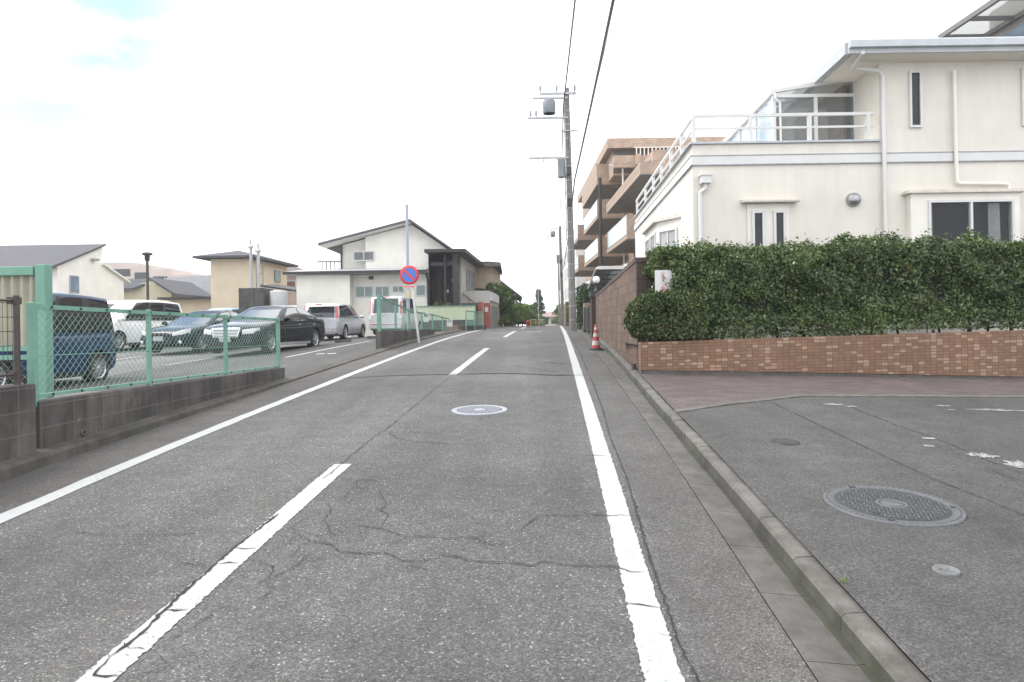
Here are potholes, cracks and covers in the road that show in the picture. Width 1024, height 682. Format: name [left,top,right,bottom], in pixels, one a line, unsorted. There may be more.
manhole cover [451,405,508,415]
manhole cover [823,485,966,527]
manhole cover [932,564,961,577]
crack [76,477,645,677]
